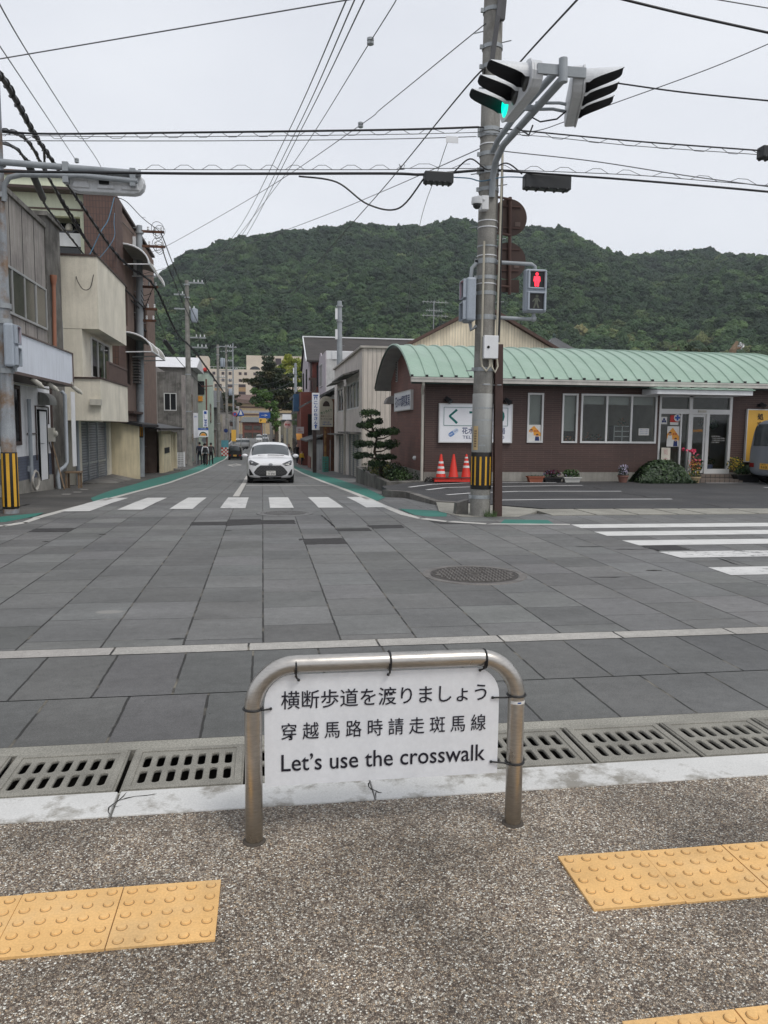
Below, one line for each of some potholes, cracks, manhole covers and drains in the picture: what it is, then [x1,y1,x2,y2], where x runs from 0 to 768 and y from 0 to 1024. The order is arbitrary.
drain grate [0,756,12,774]
drain grate [563,723,700,764]
drain grate [119,744,245,793]
manhole cover [422,565,527,585]
drain grate [497,728,594,769]
